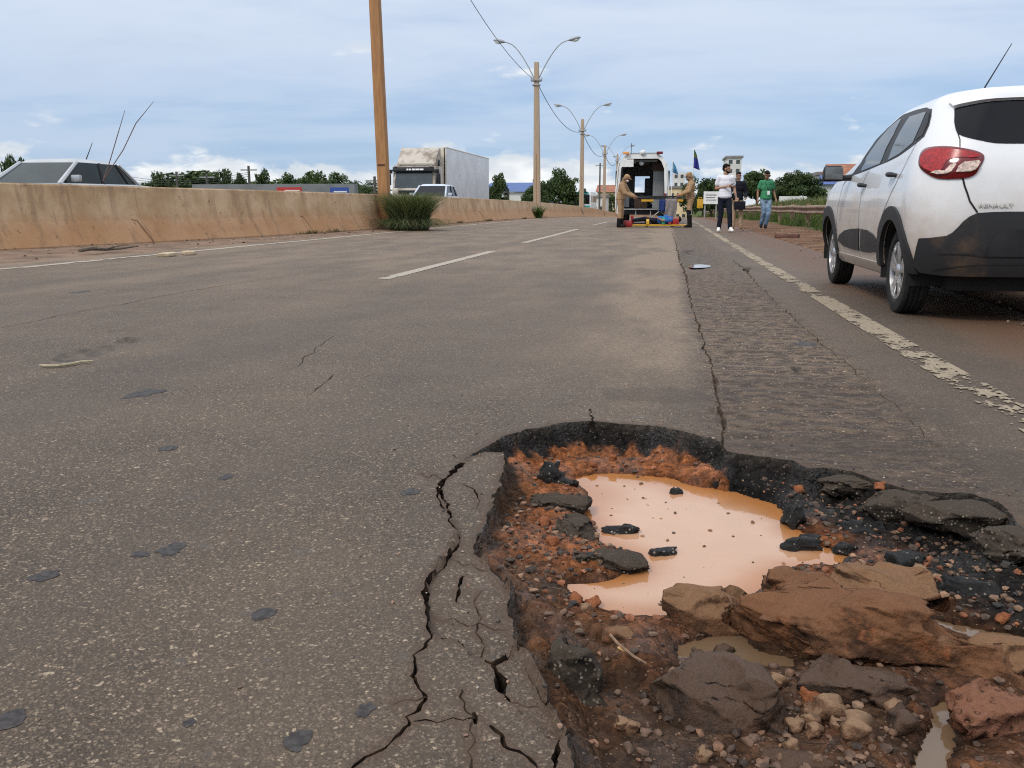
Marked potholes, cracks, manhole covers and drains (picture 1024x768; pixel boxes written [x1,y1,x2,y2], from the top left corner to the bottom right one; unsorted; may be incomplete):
crack [297,337,334,398]
pothole [464,421,1024,768]
crack [351,463,569,768]
